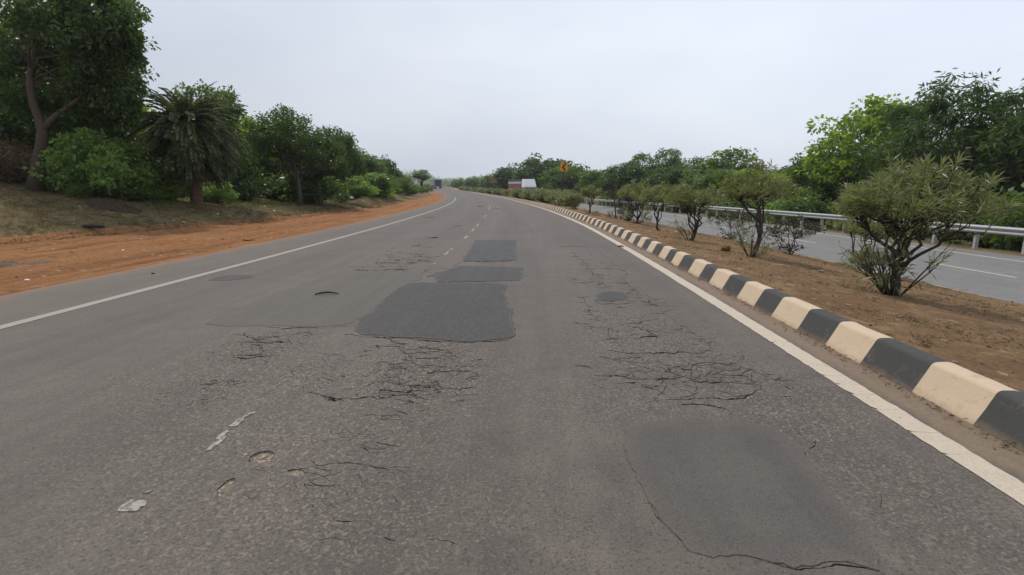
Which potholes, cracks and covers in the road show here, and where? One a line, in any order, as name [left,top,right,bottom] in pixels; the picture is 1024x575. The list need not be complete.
pothole [249,450,274,466]
pothole [217,478,235,497]
crack [651,506,879,572]
crack [208,325,512,508]
crack [565,246,795,416]
